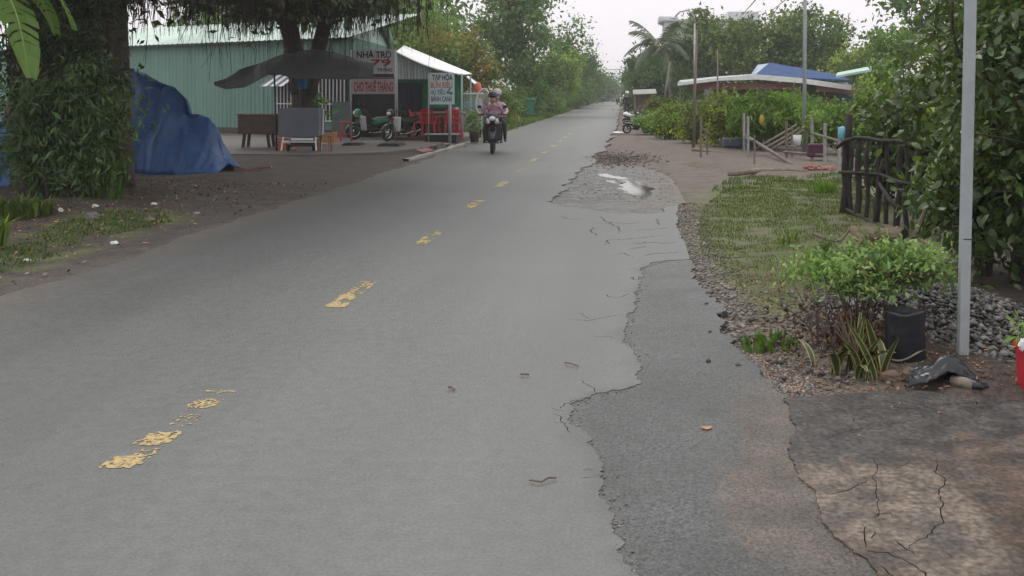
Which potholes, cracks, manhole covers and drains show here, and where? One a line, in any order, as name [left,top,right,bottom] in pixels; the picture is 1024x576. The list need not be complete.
crack [826,459,946,576]
crack [564,217,676,256]
pothole [551,163,686,214]
